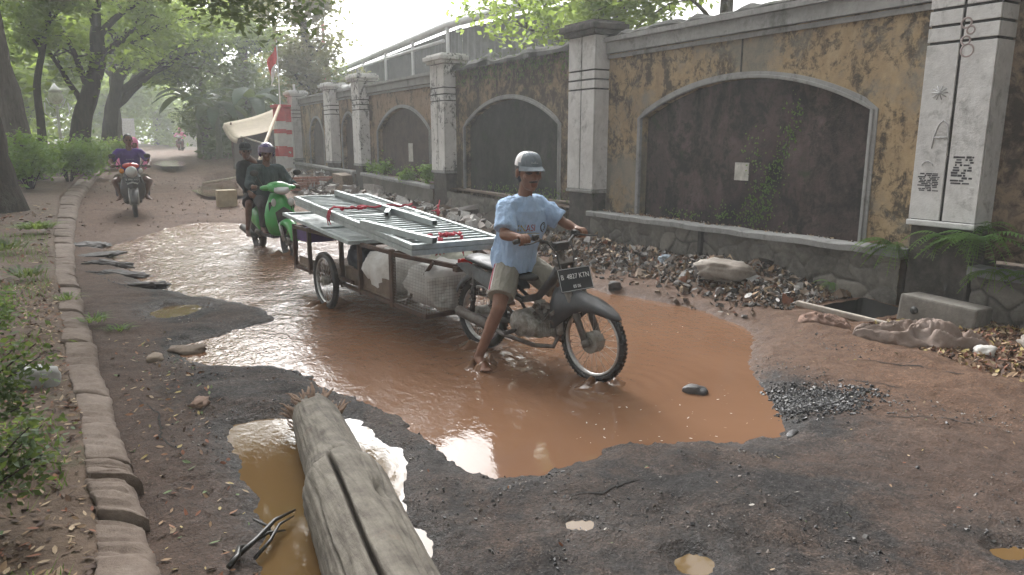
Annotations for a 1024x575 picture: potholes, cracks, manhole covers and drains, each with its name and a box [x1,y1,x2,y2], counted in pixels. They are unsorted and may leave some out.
pothole [219,411,447,575]
pothole [658,539,734,575]
pothole [977,533,1024,561]
pothole [100,220,793,482]
crack [569,478,660,496]
pothole [554,510,609,534]
